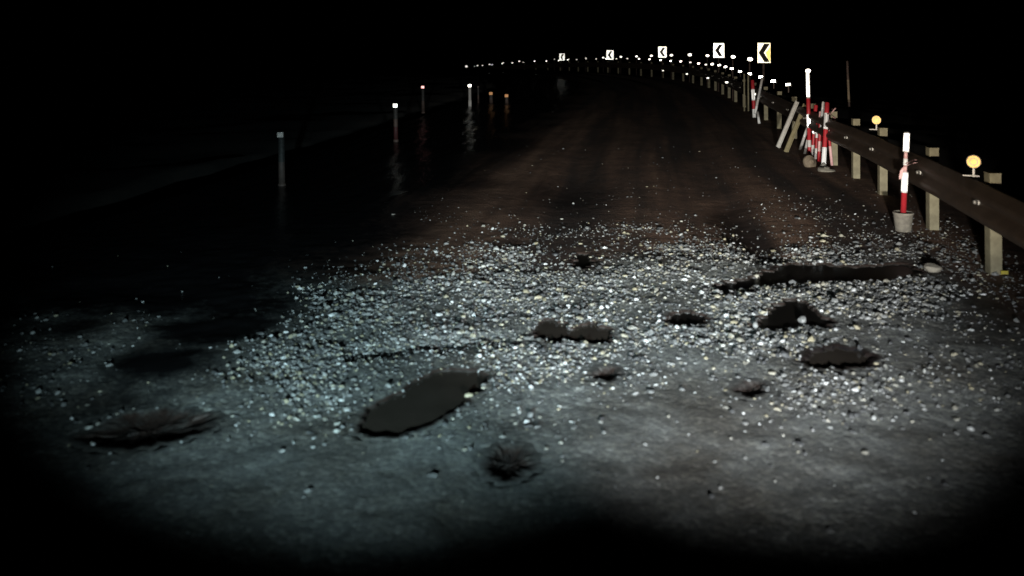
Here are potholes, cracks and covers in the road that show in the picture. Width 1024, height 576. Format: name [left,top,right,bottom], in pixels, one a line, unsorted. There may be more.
pothole [738,296,845,334]
pothole [708,261,930,294]
pothole [474,440,546,487]
pothole [60,403,230,454]
pothole [656,308,720,328]
pothole [723,377,778,401]
pothole [789,342,885,373]
pothole [347,365,498,441]
pothole [524,316,622,346]
pothole [581,363,632,385]
